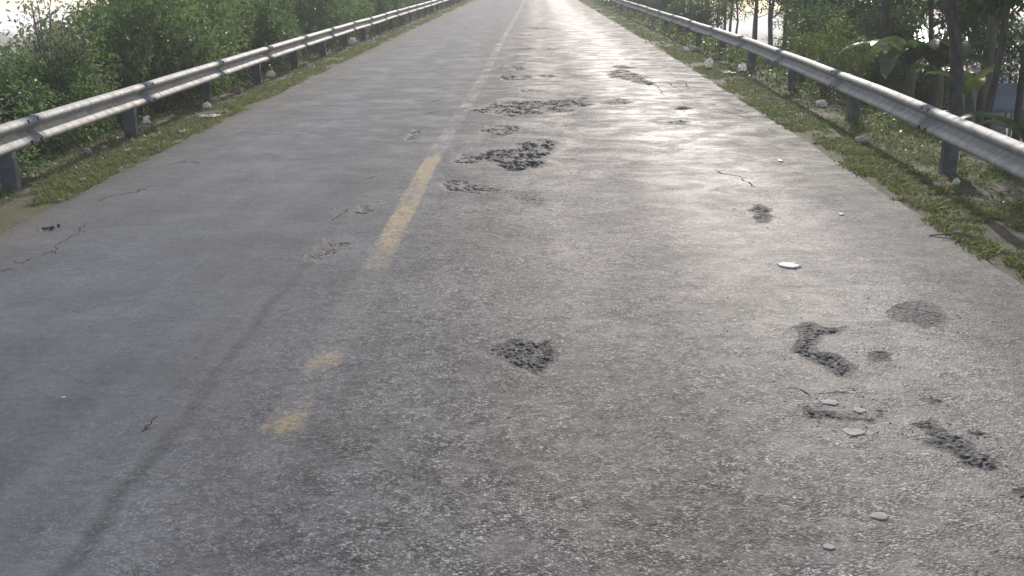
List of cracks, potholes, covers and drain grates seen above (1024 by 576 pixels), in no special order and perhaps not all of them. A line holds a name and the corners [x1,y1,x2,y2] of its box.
pothole [789,321,859,378]
pothole [478,125,523,136]
pothole [902,417,1003,472]
pothole [303,236,353,264]
pothole [484,338,559,380]
pothole [747,204,776,224]
pothole [606,69,656,86]
pothole [439,178,502,194]
pothole [449,138,559,172]
pothole [464,97,595,117]
pothole [797,404,885,425]
crack [1,223,86,272]
